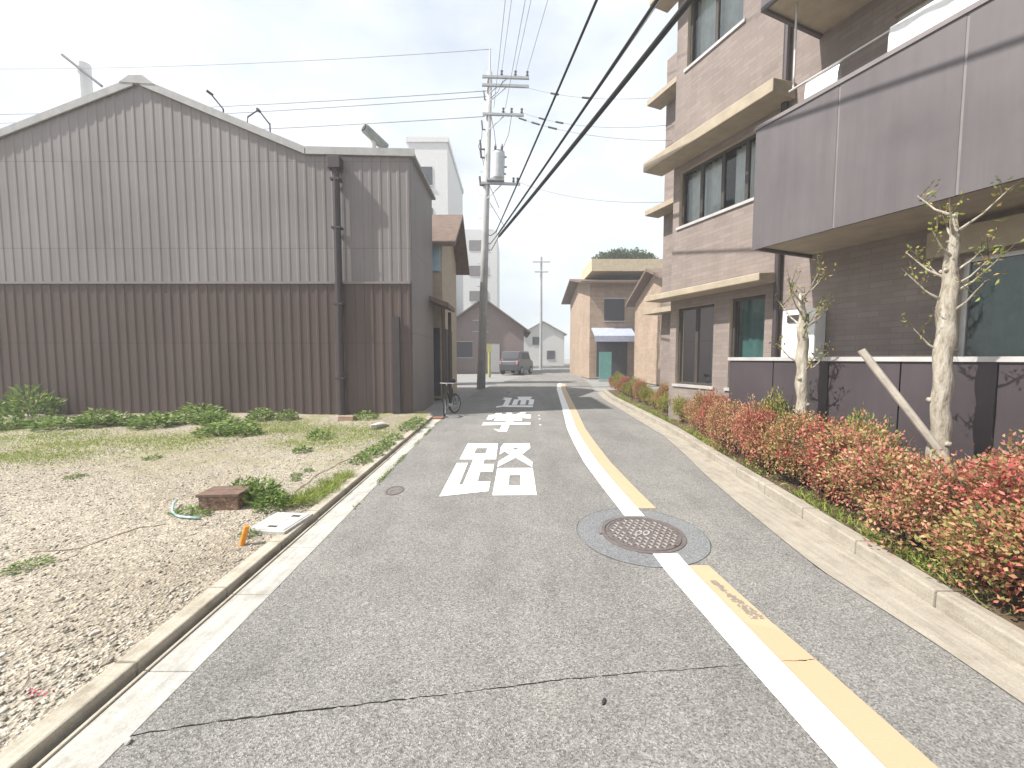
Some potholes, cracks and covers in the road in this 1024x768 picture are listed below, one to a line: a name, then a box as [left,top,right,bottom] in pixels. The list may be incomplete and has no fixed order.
utility cover [385,486,404,495]
crack [133,664,742,736]
manhole cover [599,516,687,554]
